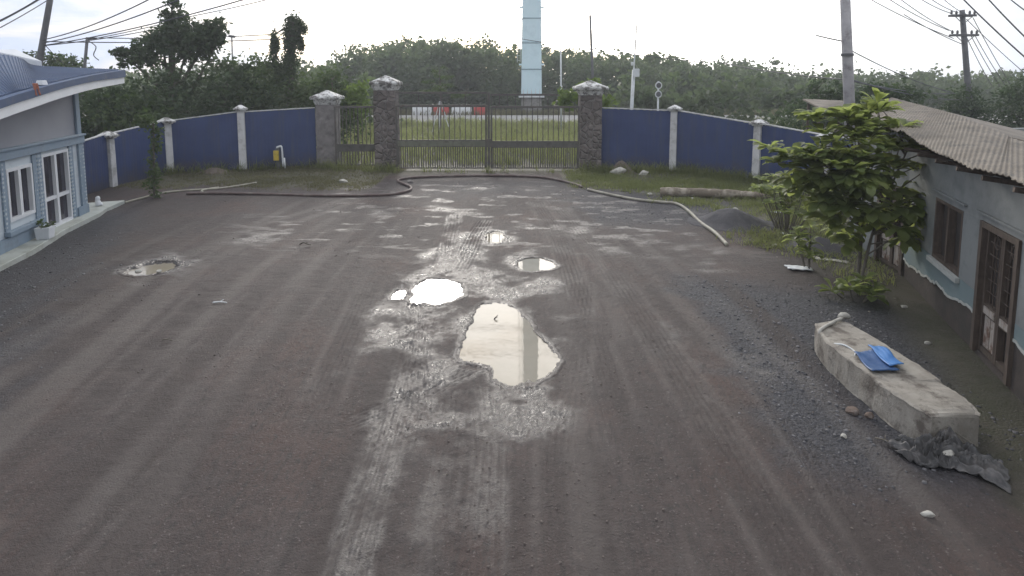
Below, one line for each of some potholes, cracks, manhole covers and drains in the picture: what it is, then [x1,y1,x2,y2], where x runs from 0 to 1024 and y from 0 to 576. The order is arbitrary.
pothole [386,288,410,301]
pothole [406,277,469,307]
pothole [116,258,185,278]
pothole [481,230,510,245]
pothole [512,256,561,273]
pothole [451,300,566,390]
